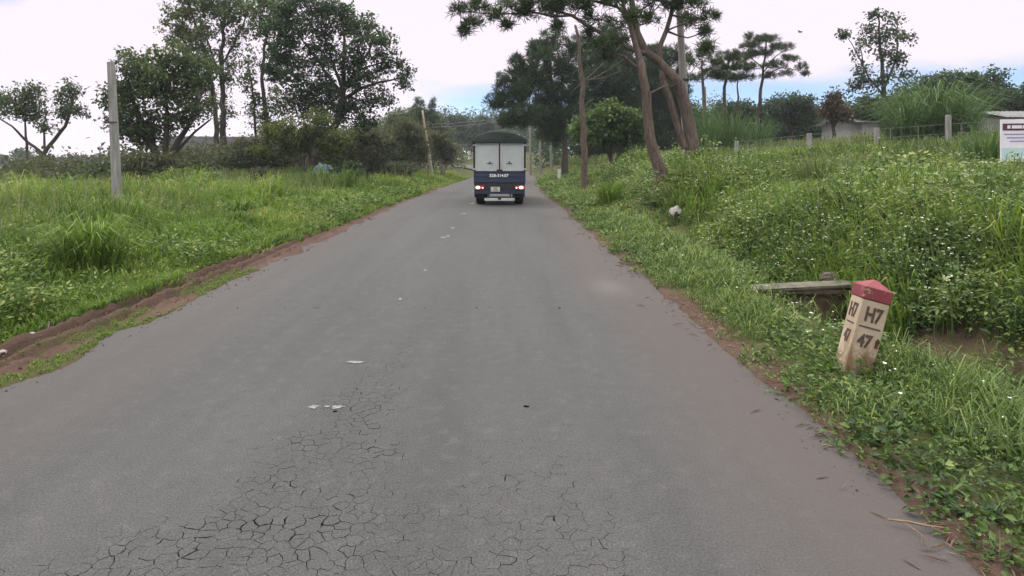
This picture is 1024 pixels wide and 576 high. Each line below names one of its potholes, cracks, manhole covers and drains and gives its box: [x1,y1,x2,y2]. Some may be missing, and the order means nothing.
crack [403,419,676,576]
crack [0,319,428,576]
